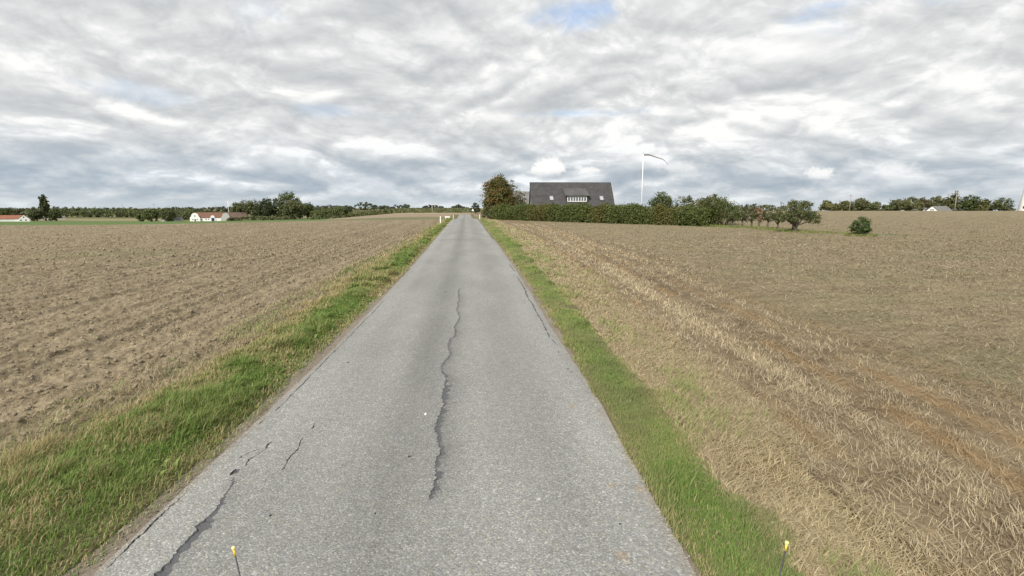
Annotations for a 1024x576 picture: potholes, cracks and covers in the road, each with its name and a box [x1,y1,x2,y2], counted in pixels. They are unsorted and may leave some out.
crack [428,290,461,501]
crack [108,423,315,576]
crack [509,264,558,345]
